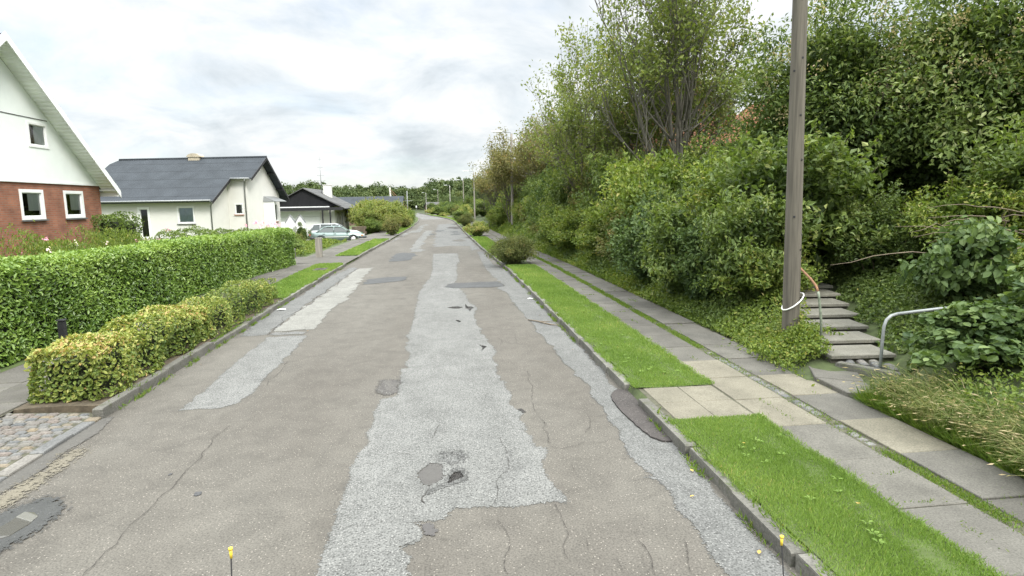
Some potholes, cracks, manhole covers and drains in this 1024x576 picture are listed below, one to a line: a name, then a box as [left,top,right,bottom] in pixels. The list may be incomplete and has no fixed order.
pothole [418,463,444,486]
crack [83,426,229,574]
